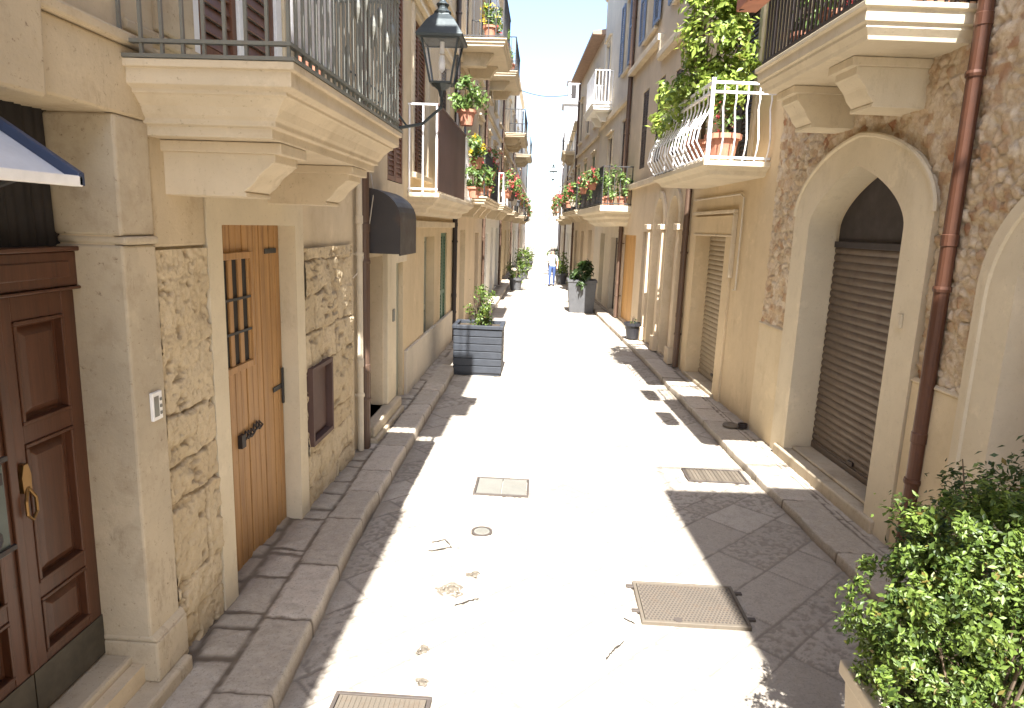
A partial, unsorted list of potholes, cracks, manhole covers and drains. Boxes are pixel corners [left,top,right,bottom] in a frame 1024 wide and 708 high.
manhole cover [473,477,530,498]
manhole cover [626,581,756,631]
manhole cover [471,526,492,536]
